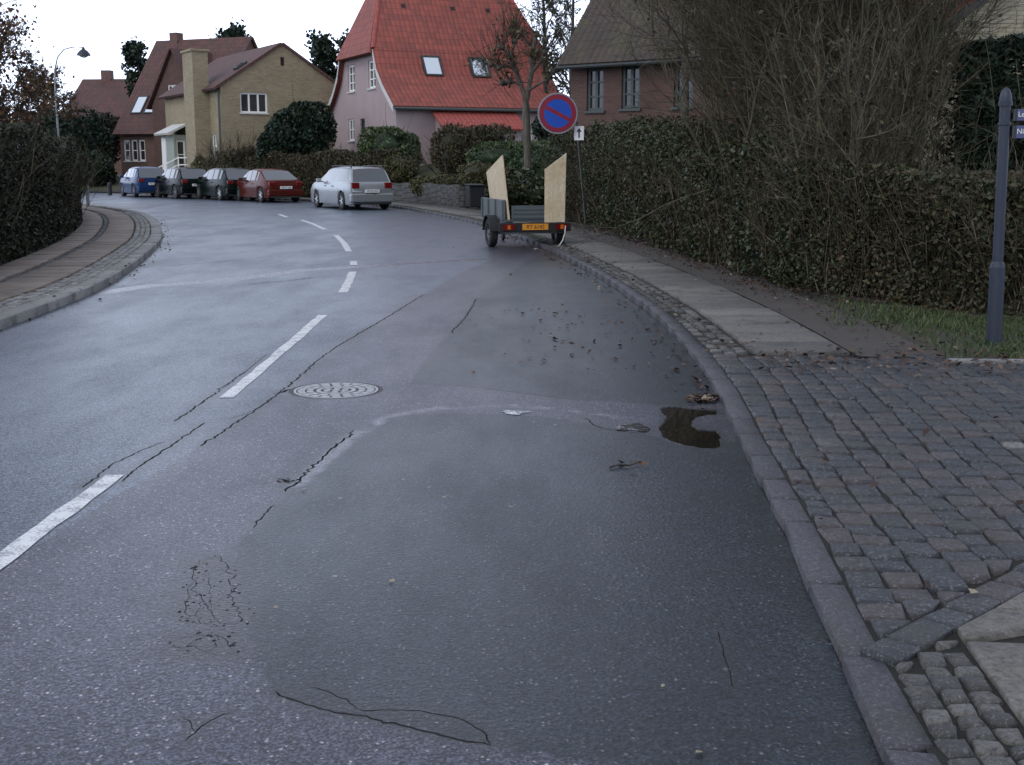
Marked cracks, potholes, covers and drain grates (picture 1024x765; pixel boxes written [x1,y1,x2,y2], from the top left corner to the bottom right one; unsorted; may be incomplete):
manhole cover [289,382,383,399]
crack [169,558,255,653]
crack [82,355,266,488]
crack [276,688,491,746]
crack [718,632,733,686]
